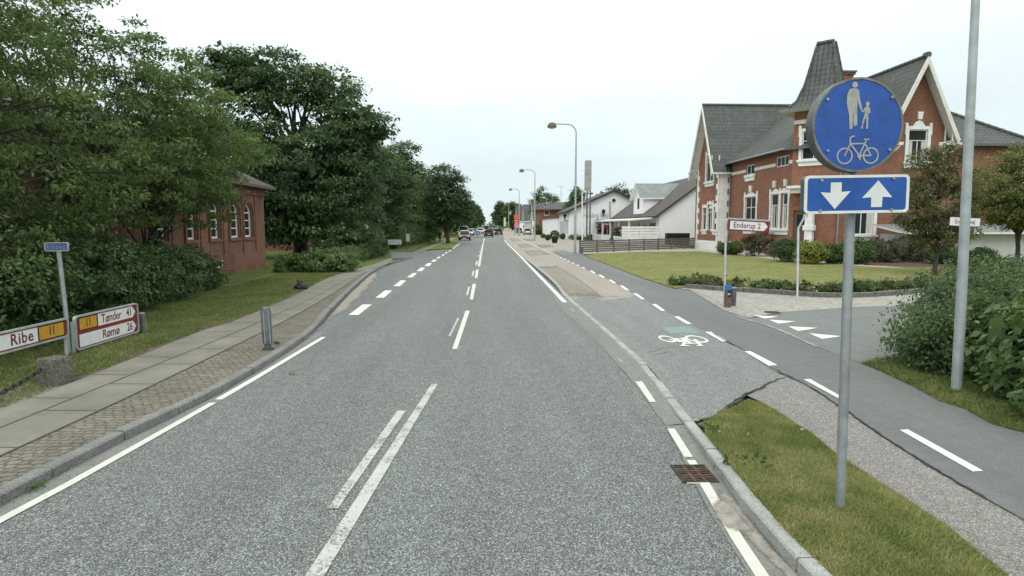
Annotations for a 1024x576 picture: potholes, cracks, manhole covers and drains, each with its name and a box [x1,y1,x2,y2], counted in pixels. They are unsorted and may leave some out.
drain grate [670,464,719,483]
